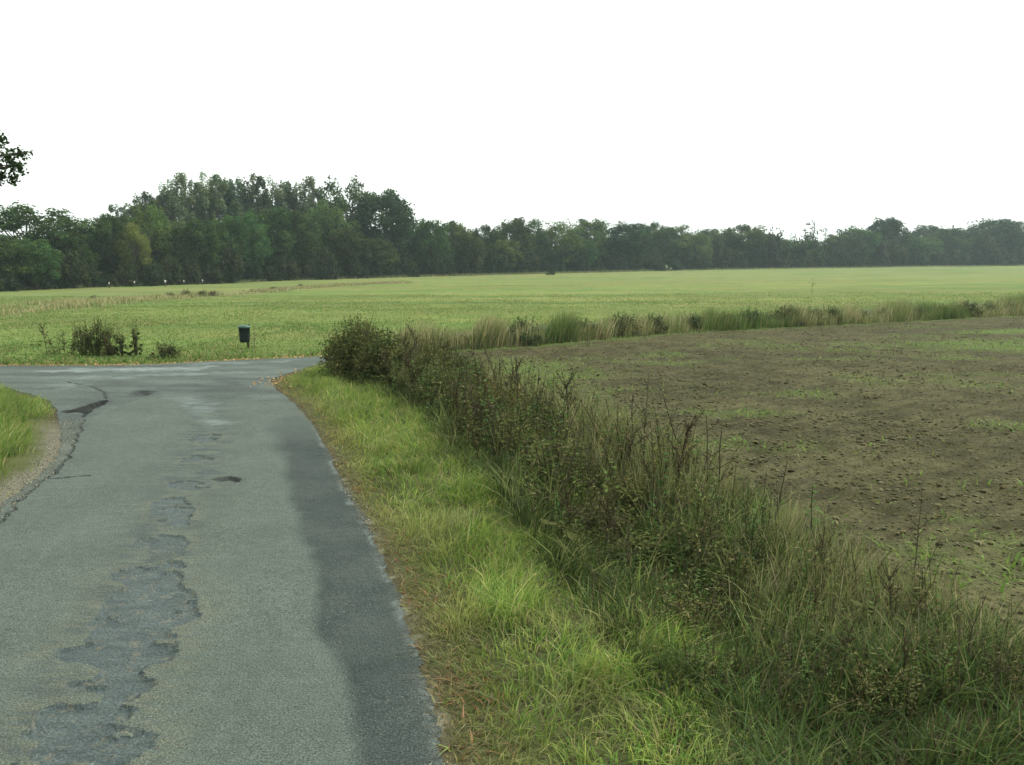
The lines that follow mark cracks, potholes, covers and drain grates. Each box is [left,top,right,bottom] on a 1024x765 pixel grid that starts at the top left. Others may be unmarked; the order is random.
pothole [62,400,109,417]
crack [68,382,108,399]
crack [0,420,92,524]
